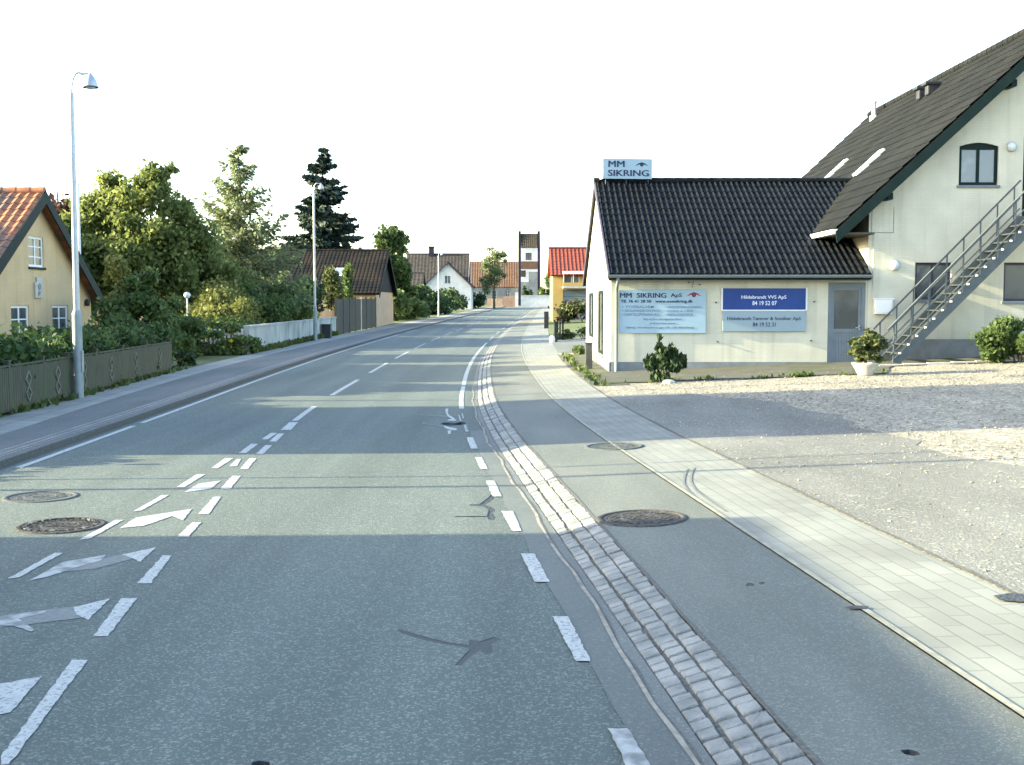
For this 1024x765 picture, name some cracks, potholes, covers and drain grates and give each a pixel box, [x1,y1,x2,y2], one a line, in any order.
manhole cover [595,509,688,527]
manhole cover [14,517,107,534]
manhole cover [2,490,80,503]
manhole cover [584,442,644,452]
